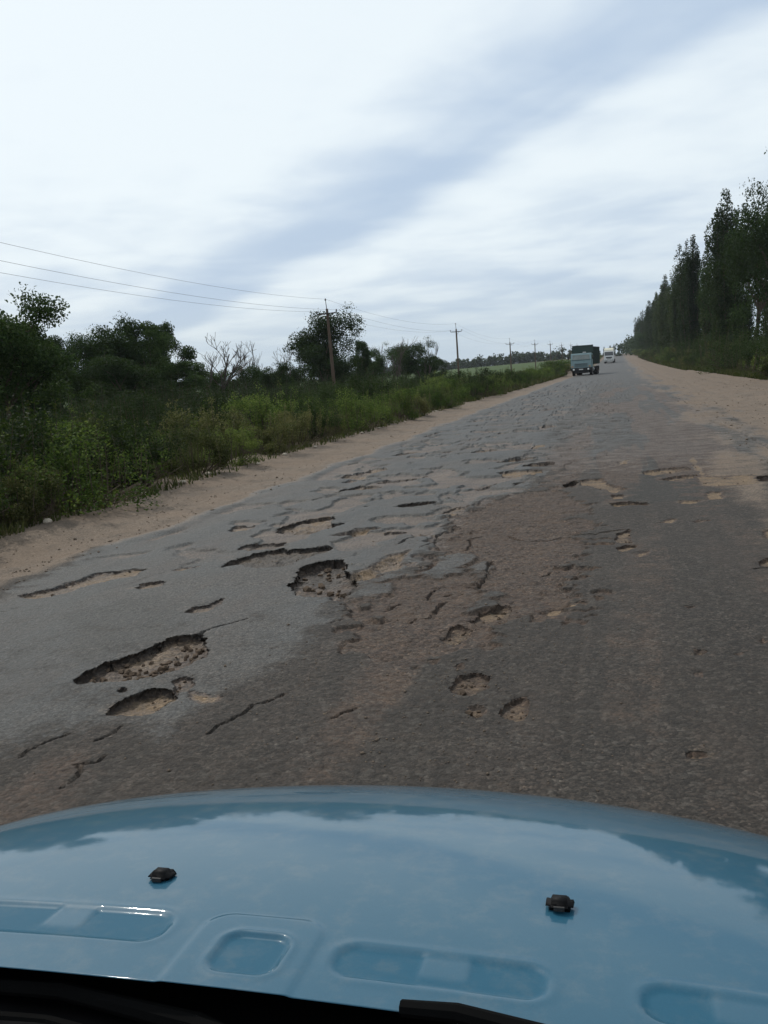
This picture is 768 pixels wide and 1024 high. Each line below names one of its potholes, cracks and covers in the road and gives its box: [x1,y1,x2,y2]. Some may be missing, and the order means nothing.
pothole [439,624,473,645]
pothole [73,633,210,684]
pothole [17,568,146,599]
pothole [238,543,284,551]
pothole [642,467,691,476]
pothole [448,672,491,696]
pothole [275,516,345,535]
crack [207,693,287,735]
pothole [221,545,333,568]
crack [59,726,122,790]
pothole [287,559,360,599]
crack [18,734,66,759]
